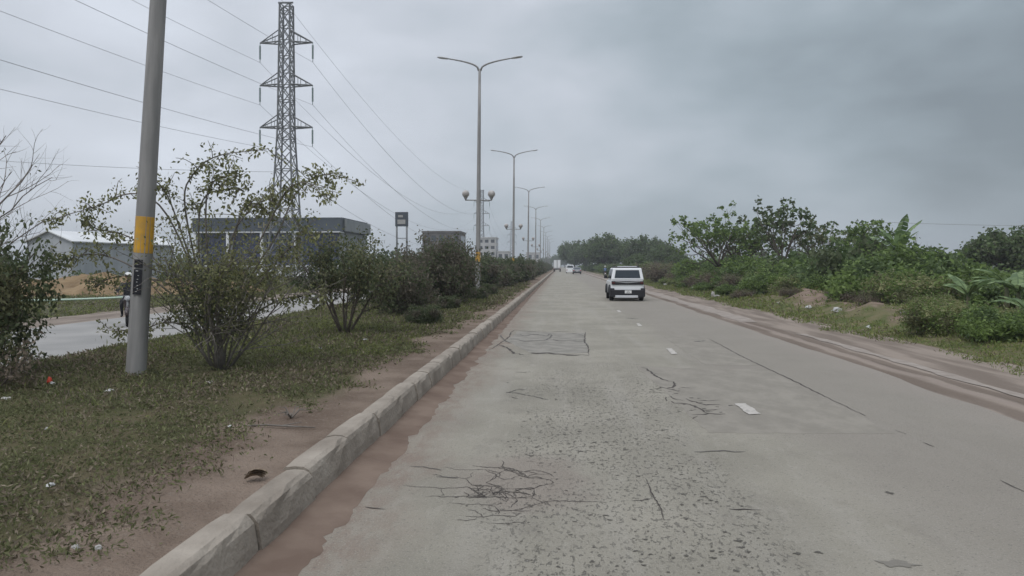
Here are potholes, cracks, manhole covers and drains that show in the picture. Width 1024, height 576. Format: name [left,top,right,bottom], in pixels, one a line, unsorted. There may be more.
crack [413,461,597,524]
crack [642,367,720,419]
crack [632,479,664,519]
